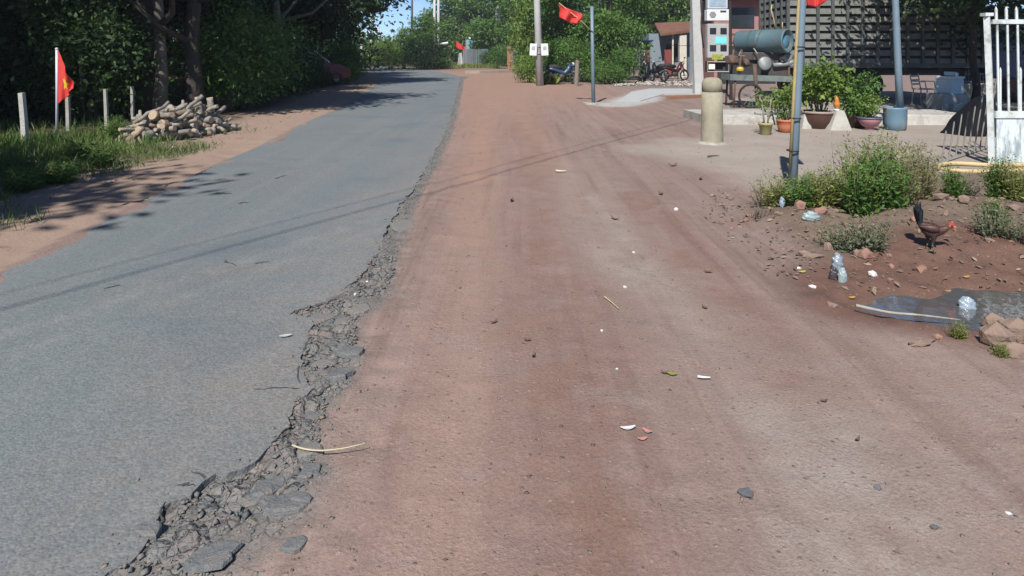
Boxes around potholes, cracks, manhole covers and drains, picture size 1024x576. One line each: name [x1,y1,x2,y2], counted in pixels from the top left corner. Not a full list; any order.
pothole [301,306,353,367]
pothole [275,396,321,465]
crack [256,339,330,397]
crack [156,471,207,524]
pothole [140,515,210,567]
pothole [197,472,301,515]
